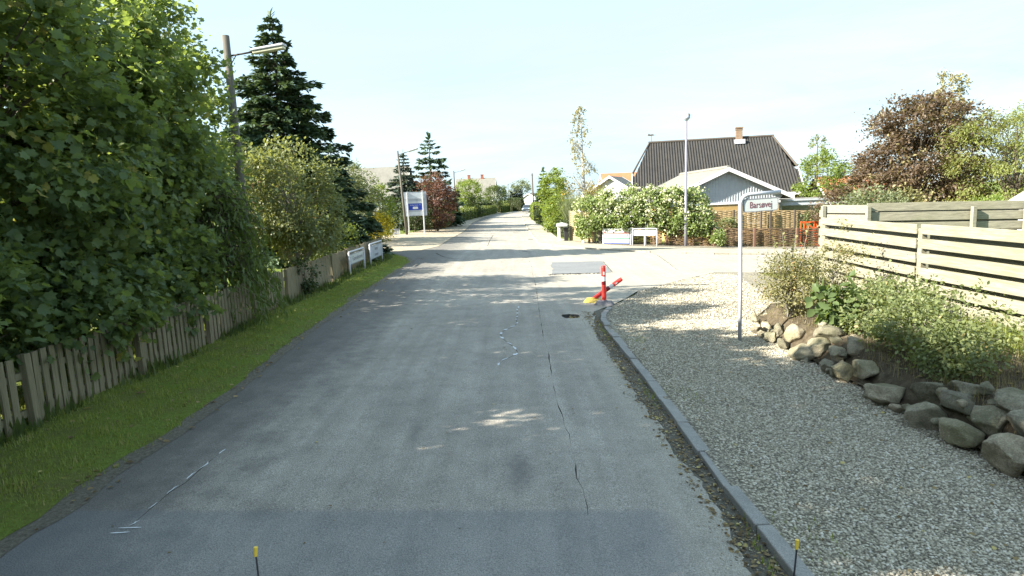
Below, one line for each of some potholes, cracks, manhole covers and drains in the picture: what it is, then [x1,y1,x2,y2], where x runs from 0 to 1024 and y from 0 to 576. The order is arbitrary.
crack [113,449,225,535]
crack [498,306,519,365]
